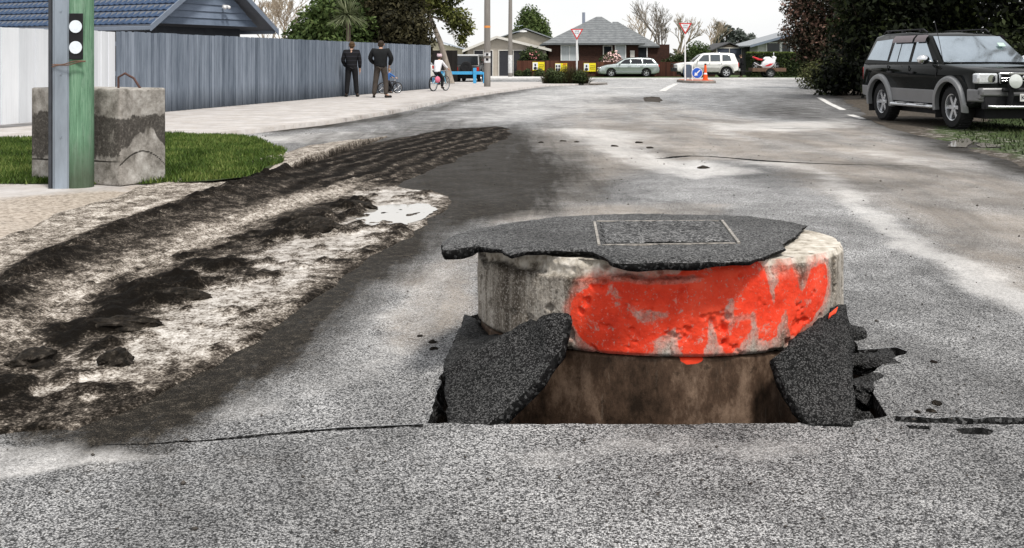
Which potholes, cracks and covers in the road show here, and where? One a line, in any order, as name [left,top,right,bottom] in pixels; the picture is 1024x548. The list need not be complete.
pothole [427,314,908,424]
crack [109,424,424,445]
manhole cover [593,220,740,246]
crack [658,156,907,166]
crack [893,416,1024,435]
